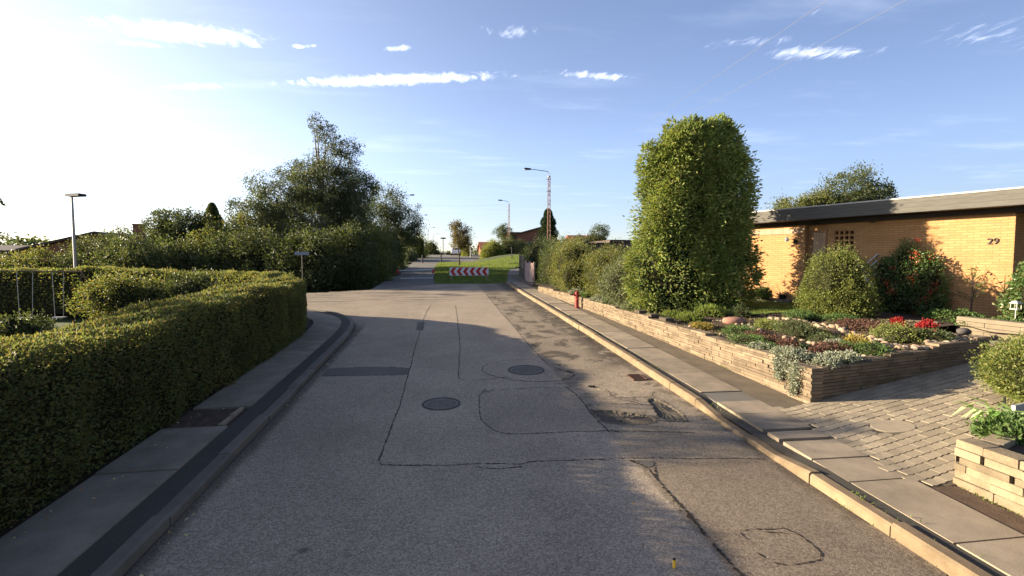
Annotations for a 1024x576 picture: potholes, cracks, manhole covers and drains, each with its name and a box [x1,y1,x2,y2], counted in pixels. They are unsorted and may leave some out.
pothole [646,398,688,422]
pothole [589,409,661,426]
manhole cover [422,397,461,410]
manhole cover [508,365,544,375]
